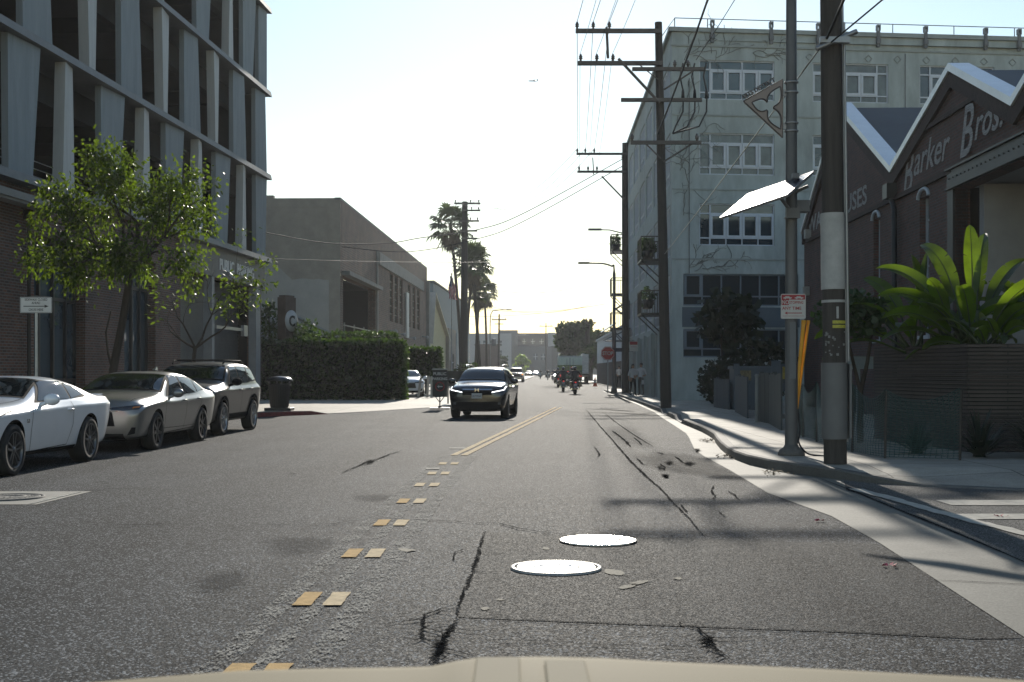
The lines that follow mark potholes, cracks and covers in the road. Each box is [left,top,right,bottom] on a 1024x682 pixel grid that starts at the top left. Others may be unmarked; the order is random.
manhole cover [559,535,637,546]
manhole cover [0,493,46,501]
crack [334,517,1017,665]
crack [594,415,689,471]
manhole cover [510,560,602,576]
